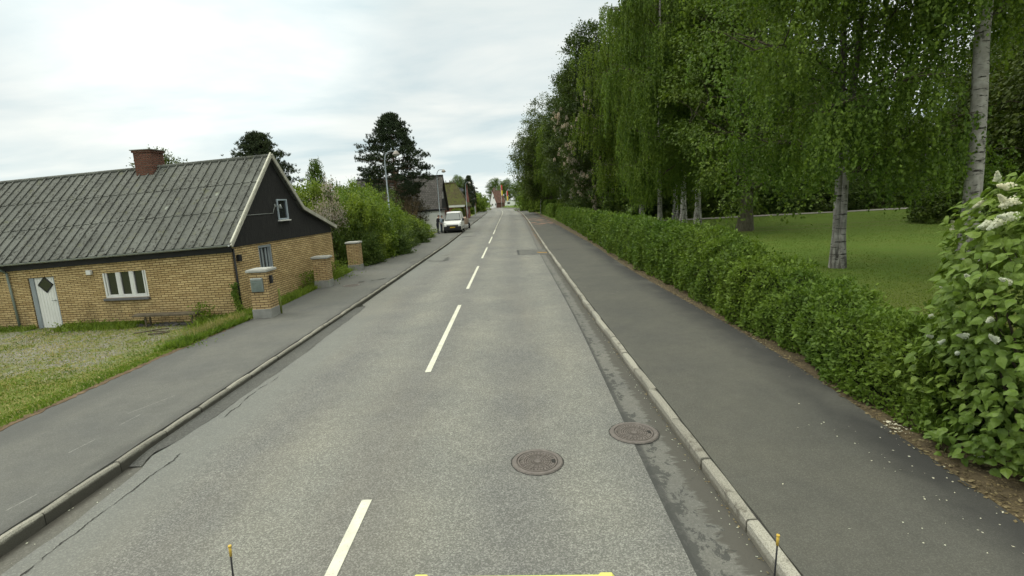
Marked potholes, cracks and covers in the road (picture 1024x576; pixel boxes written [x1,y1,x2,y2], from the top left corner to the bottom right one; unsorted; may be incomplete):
manhole cover [511,449,564,476]
manhole cover [608,422,660,444]
crack [20,454,179,576]
